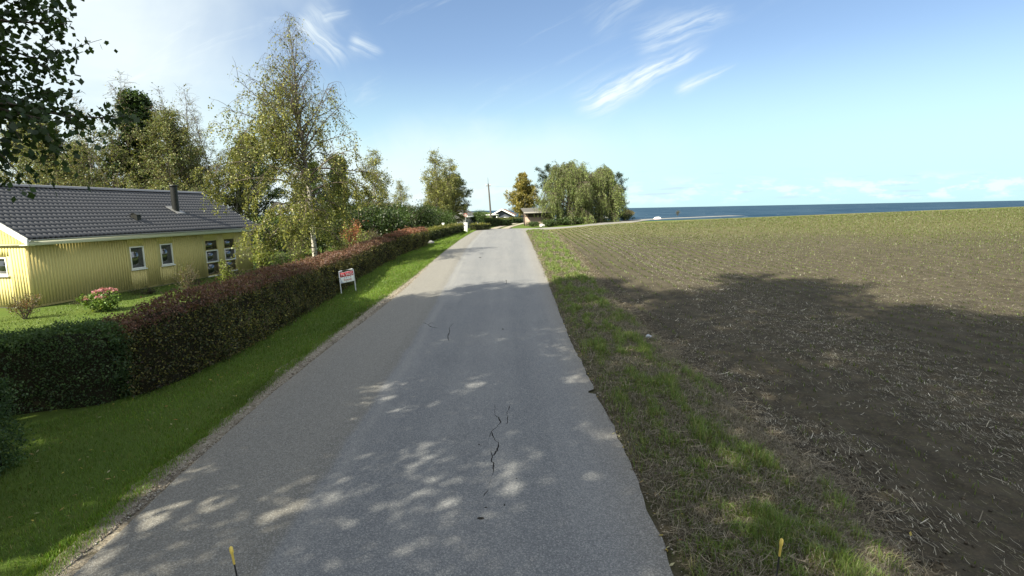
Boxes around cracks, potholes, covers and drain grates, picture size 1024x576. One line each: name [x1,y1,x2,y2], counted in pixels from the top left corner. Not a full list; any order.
crack [483,406,510,497]
